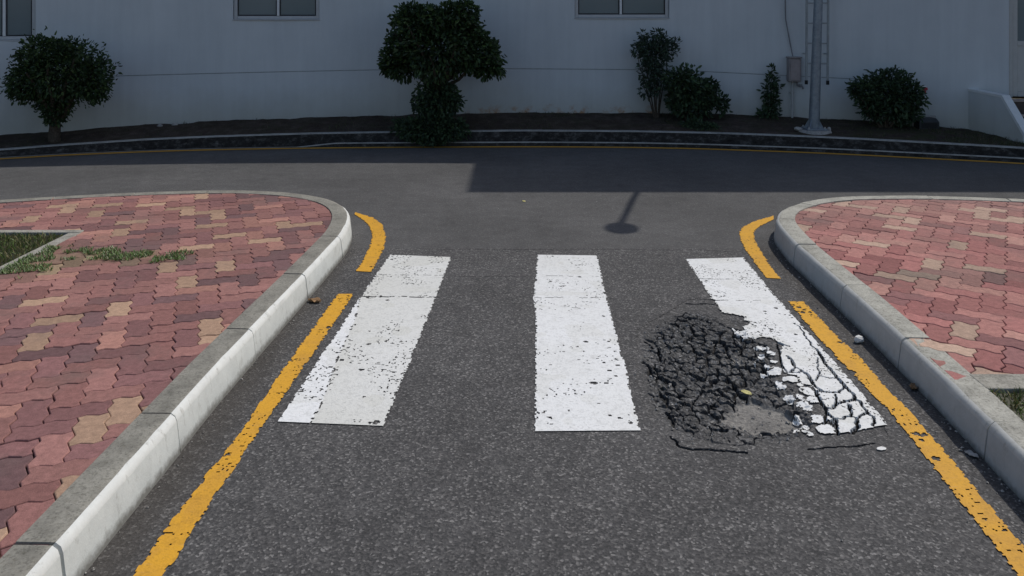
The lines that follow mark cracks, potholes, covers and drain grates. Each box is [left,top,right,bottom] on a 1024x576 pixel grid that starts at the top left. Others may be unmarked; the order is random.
pothole [708,396,813,436]
crack [635,299,888,456]
